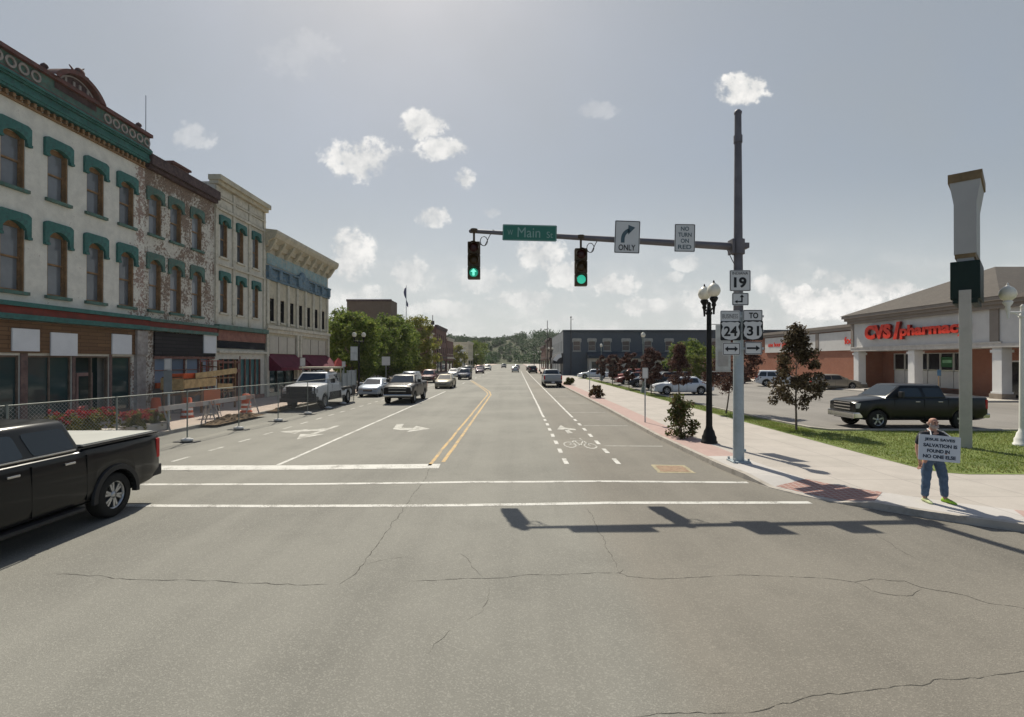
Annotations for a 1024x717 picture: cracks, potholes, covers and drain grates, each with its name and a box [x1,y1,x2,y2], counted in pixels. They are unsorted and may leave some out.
crack [343,468,430,582]
crack [426,511,710,581]
crack [638,671,1022,717]
crack [756,575,1021,608]
crack [76,574,318,585]
